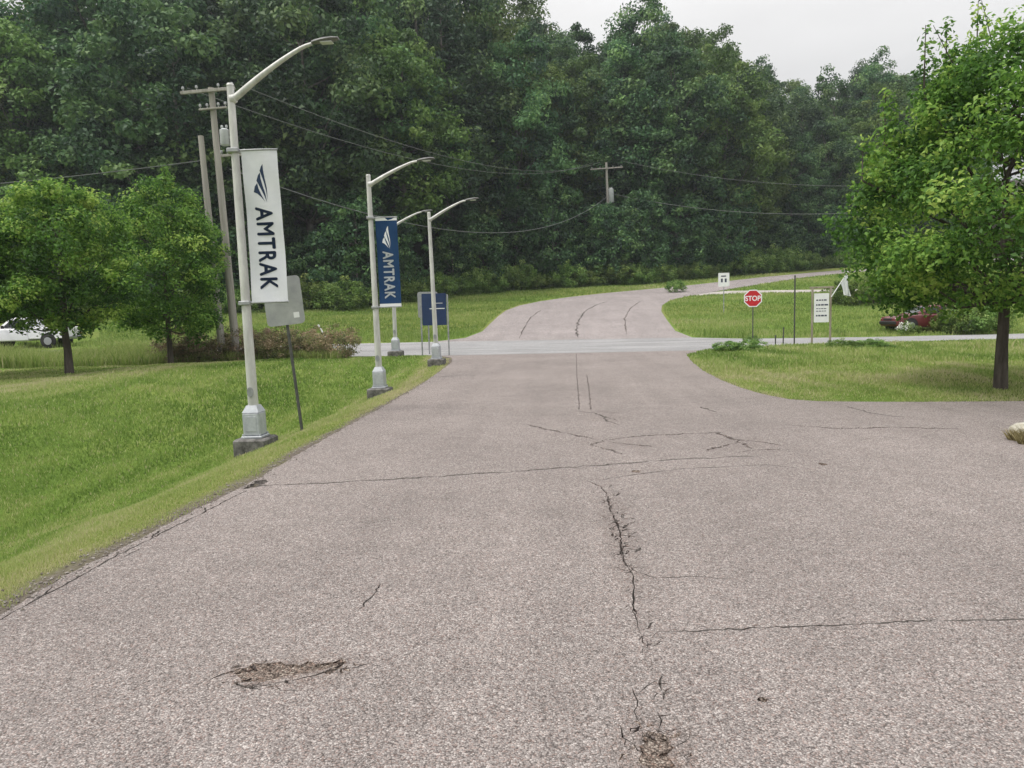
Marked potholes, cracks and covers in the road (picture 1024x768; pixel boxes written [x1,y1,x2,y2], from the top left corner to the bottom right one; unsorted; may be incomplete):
pothole [215,653,361,690]
crack [0,376,1024,746]
